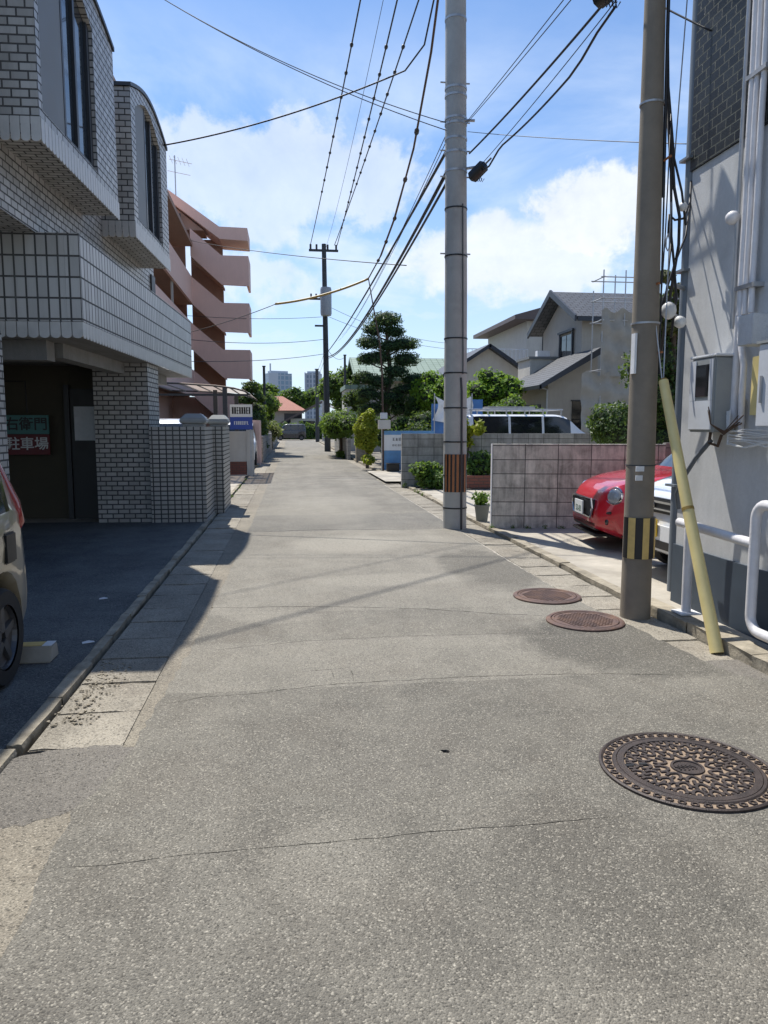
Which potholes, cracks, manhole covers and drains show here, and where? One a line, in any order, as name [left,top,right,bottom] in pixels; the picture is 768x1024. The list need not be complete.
manhole cover [513,588,581,605]
manhole cover [599,732,768,814]
manhole cover [546,610,625,632]
